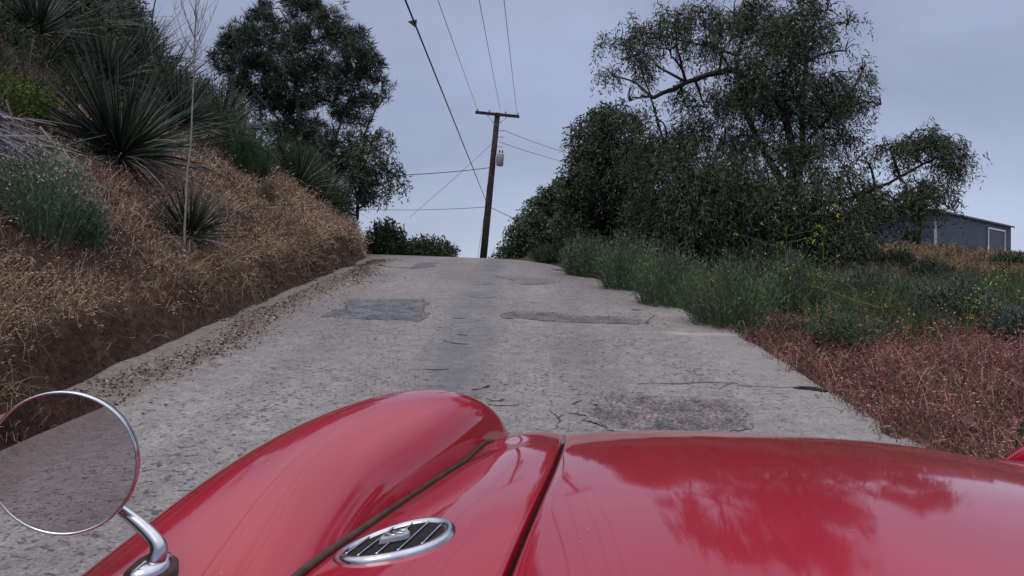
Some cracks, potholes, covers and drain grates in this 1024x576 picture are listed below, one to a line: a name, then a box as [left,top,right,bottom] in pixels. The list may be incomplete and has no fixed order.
crack [473,385,520,406]
